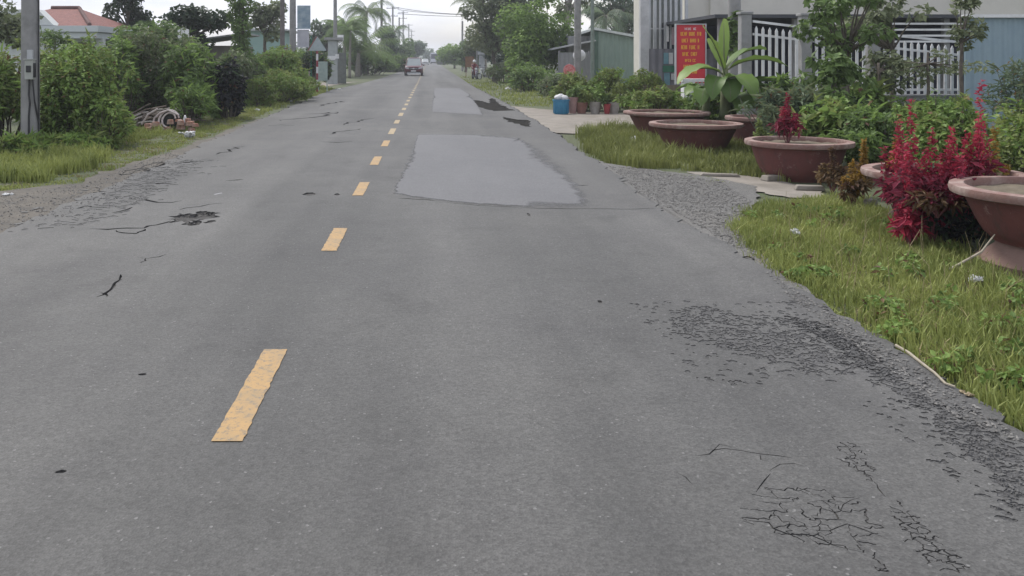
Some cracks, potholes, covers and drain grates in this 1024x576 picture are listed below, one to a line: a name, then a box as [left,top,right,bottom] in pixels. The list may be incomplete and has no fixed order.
pothole [473,98,513,111]
crack [97,274,122,297]
pothole [503,117,531,127]
pothole [169,211,220,226]
crack [217,101,374,154]
crack [79,161,220,234]
crack [678,442,970,573]
